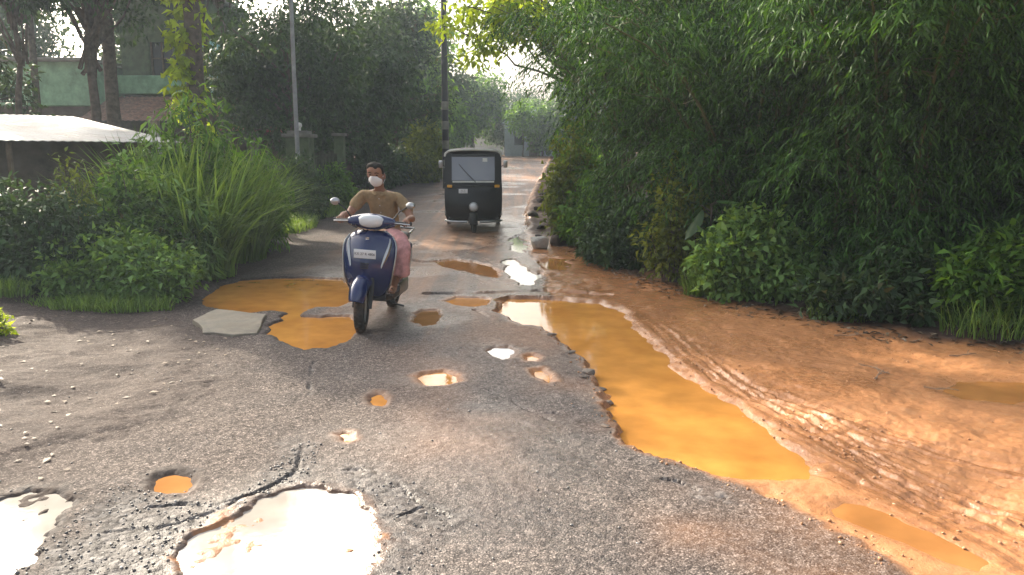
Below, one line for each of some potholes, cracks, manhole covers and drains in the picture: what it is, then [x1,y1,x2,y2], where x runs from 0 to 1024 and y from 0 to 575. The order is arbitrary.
pothole [195,276,356,350]
pothole [170,482,383,575]
pothole [0,487,78,575]
pothole [410,309,443,326]
pothole [430,258,504,278]
pothole [363,390,393,407]
pothole [492,295,845,487]
pothole [441,296,494,307]
pothole [332,429,360,442]
crack [306,361,317,395]
pothole [142,466,203,495]
pothole [483,345,523,360]
